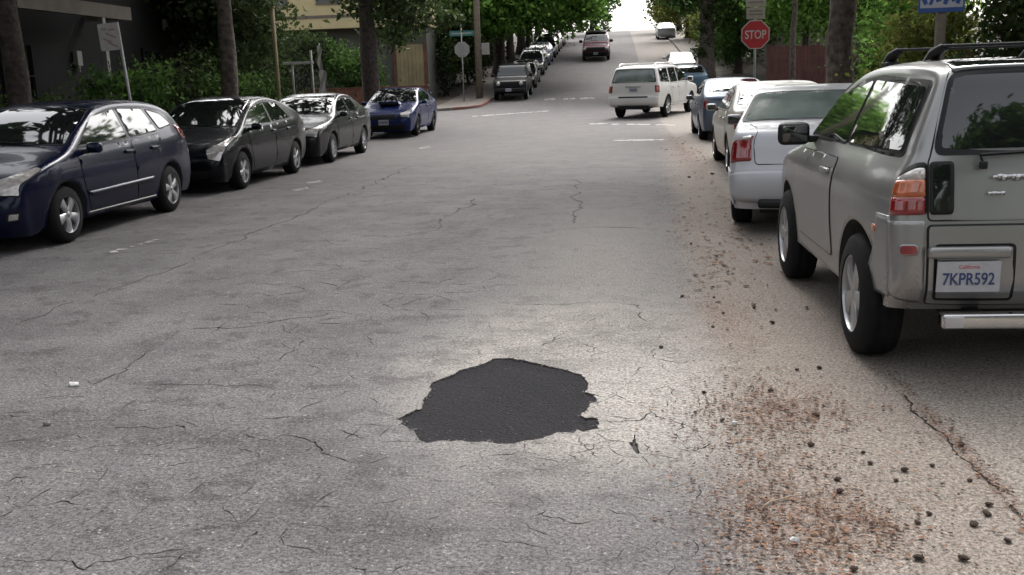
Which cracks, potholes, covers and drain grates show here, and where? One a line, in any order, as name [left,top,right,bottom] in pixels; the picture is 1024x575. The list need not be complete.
crack [194,199,501,362]
crack [569,180,643,229]
crack [8,162,420,331]
crack [0,311,708,572]
